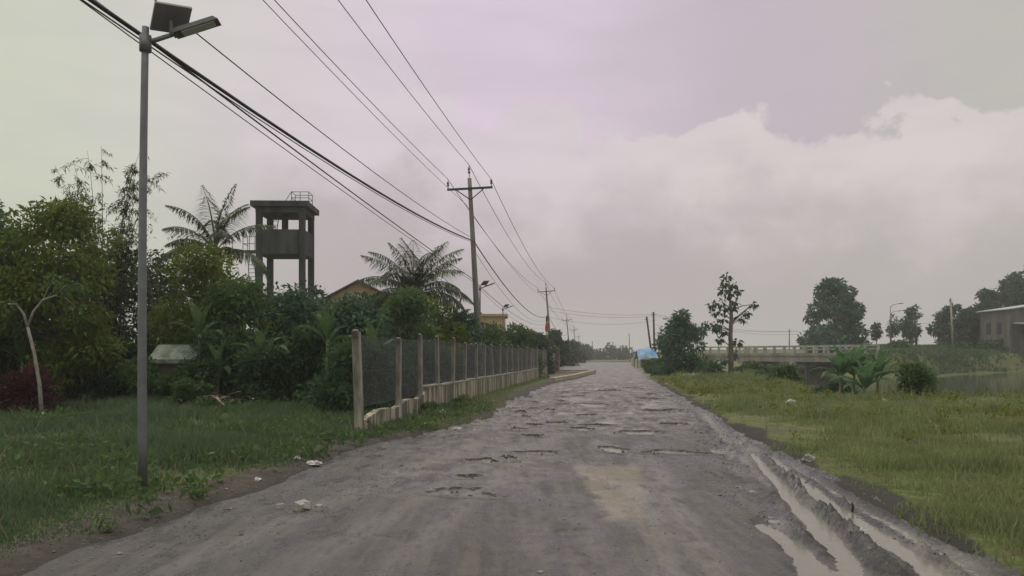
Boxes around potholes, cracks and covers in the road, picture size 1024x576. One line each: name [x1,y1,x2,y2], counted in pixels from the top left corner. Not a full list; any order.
pothole [458,456,506,464]
pothole [591,445,638,454]
pothole [415,486,510,500]
